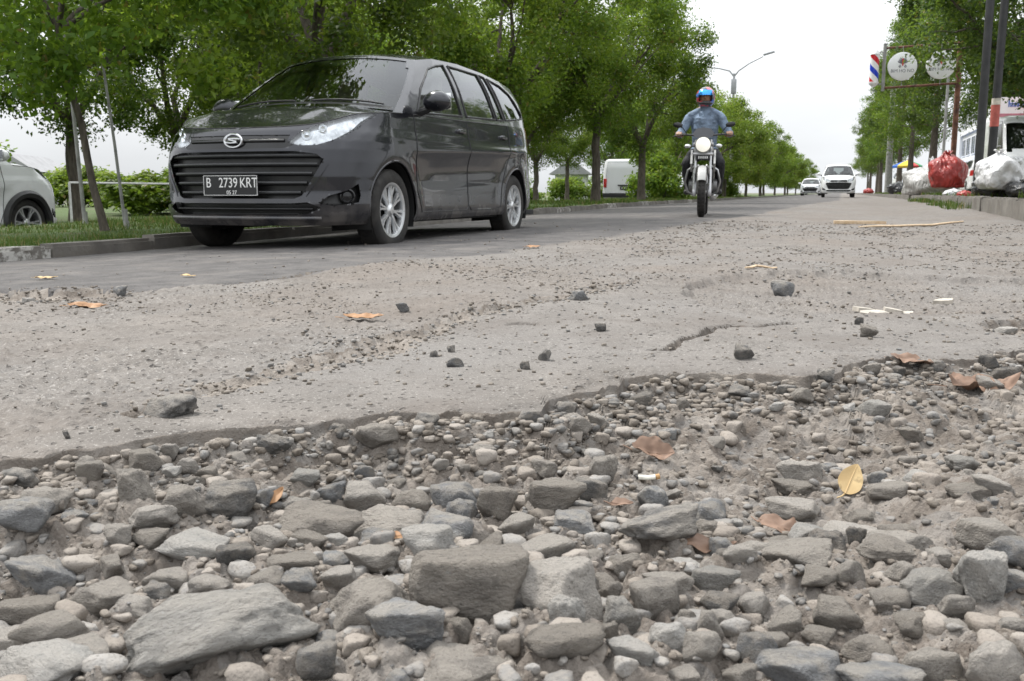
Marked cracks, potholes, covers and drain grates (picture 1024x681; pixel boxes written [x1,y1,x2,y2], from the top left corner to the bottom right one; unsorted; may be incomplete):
crack [651,322,794,351]
pothole [0,350,1024,681]
